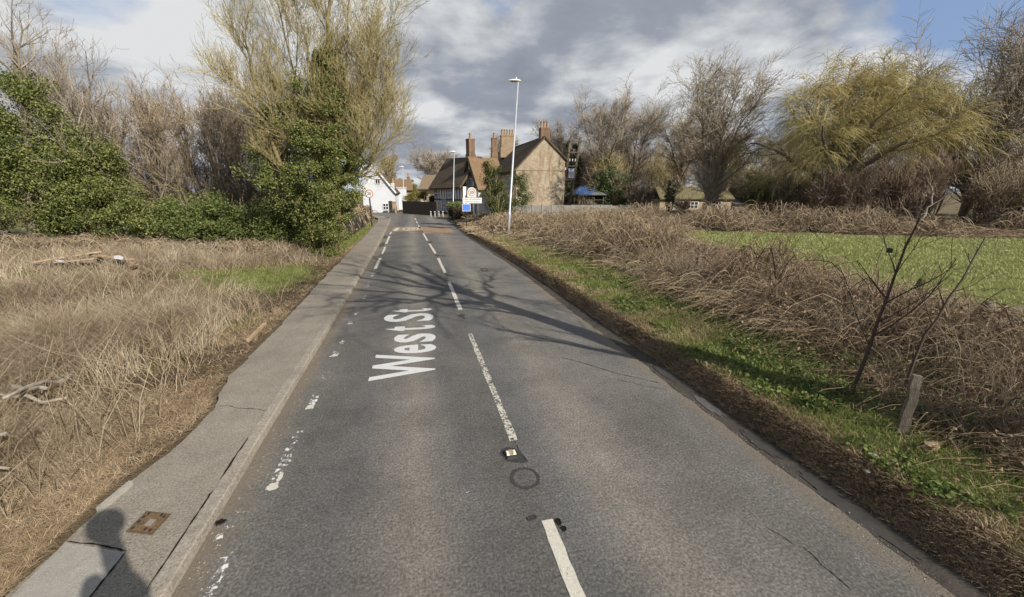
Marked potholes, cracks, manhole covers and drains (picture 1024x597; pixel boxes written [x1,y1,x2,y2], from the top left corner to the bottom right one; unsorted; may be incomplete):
manhole cover [126,511,171,535]
